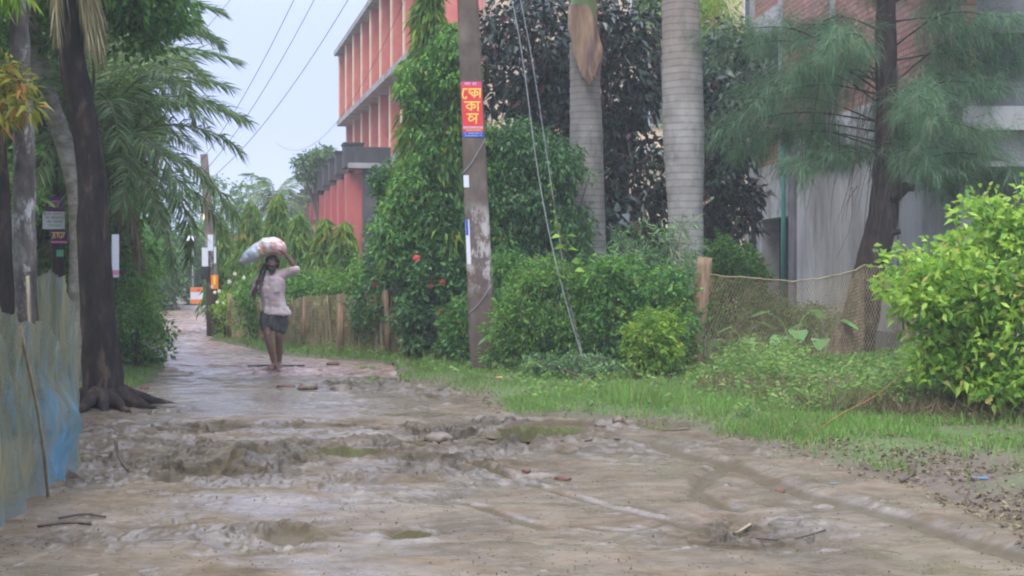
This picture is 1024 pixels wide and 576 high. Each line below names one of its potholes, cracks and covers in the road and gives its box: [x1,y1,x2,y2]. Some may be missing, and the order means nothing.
pothole [381,525,437,539]
pothole [208,445,246,475]
pothole [147,470,190,483]
pothole [479,418,596,442]
pothole [246,440,273,454]
pothole [299,441,406,458]
pothole [258,521,323,546]
